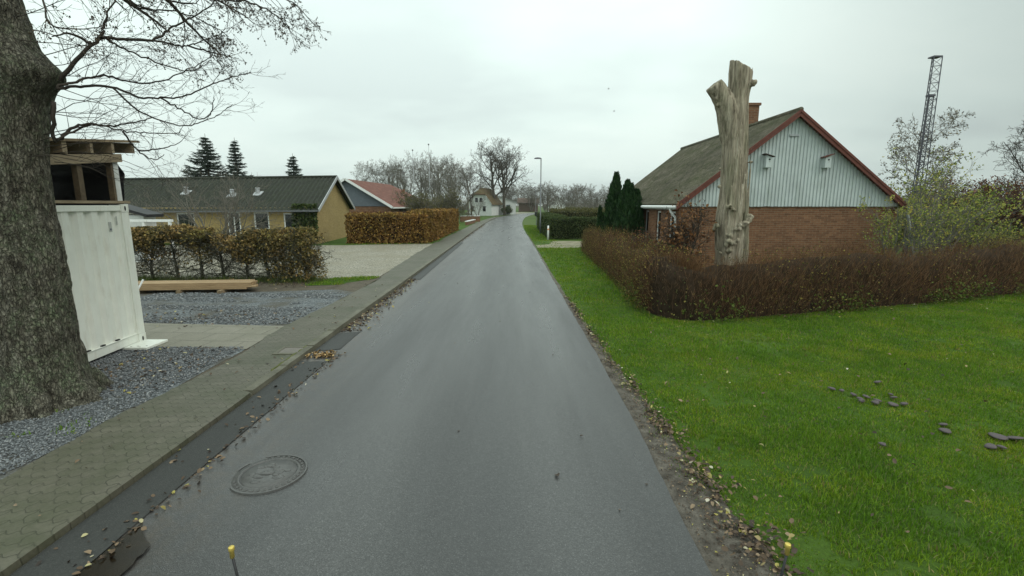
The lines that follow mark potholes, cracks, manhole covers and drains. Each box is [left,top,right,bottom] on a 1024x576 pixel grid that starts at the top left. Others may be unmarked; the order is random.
manhole cover [230,454,308,495]
